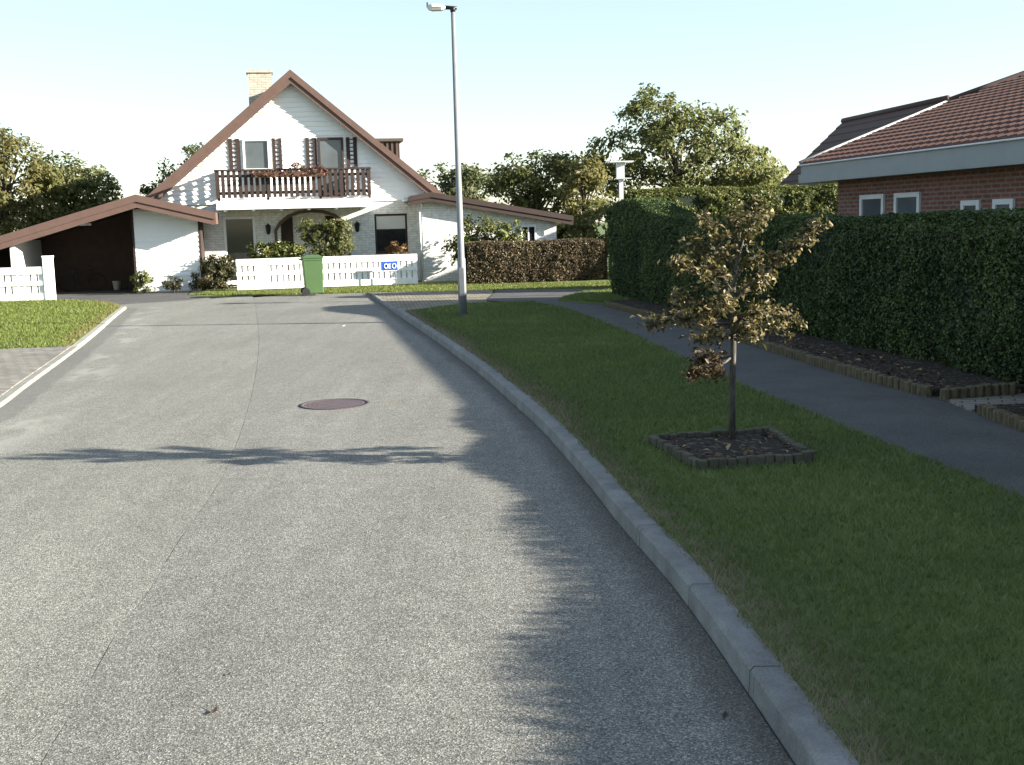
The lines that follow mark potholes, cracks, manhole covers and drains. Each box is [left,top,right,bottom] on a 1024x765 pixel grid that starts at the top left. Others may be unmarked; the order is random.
manhole cover [299,398,371,410]
